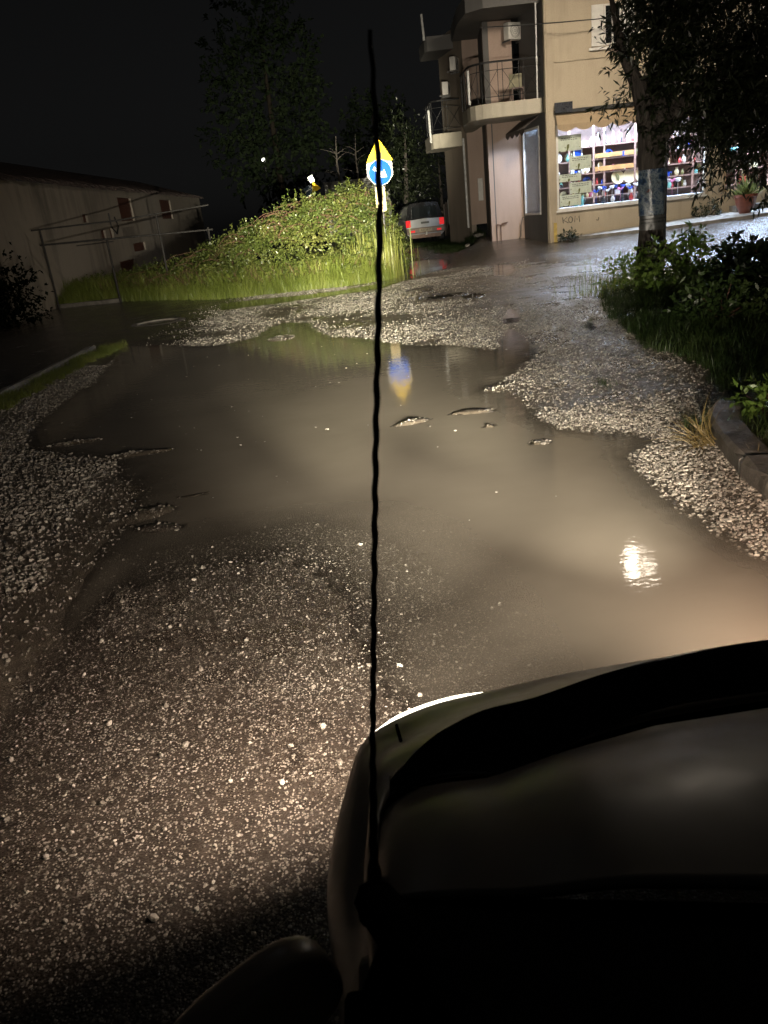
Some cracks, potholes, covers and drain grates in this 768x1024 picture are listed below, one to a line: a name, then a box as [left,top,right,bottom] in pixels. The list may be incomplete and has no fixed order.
pothole [19,317,768,903]
pothole [500,308,523,324]
